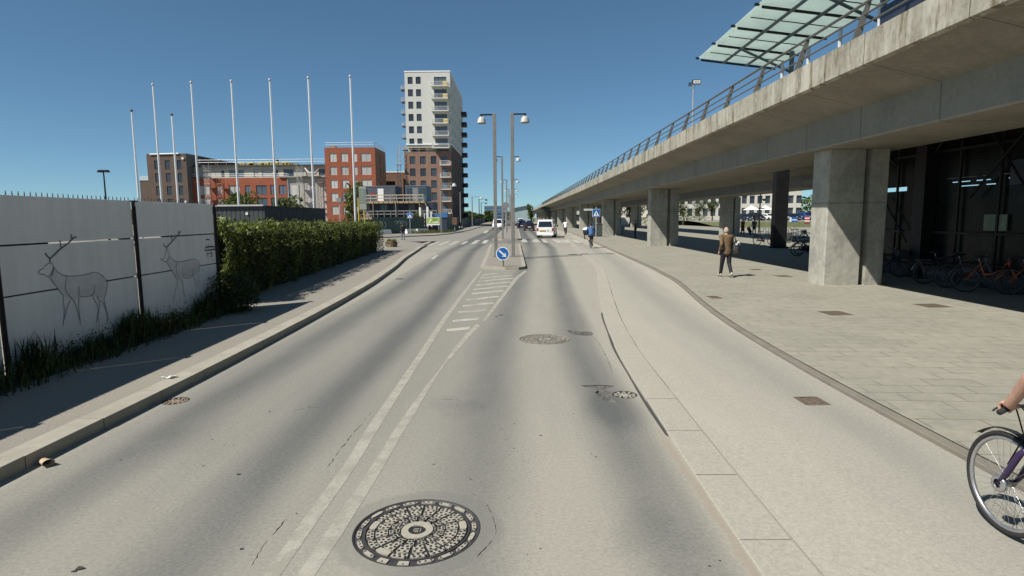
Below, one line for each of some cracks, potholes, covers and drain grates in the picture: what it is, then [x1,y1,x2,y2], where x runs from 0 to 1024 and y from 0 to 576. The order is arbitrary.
drain grate [162,397,190,405]
manhole cover [793,396,831,405]
manhole cover [519,334,570,344]
manhole cover [352,499,480,567]
